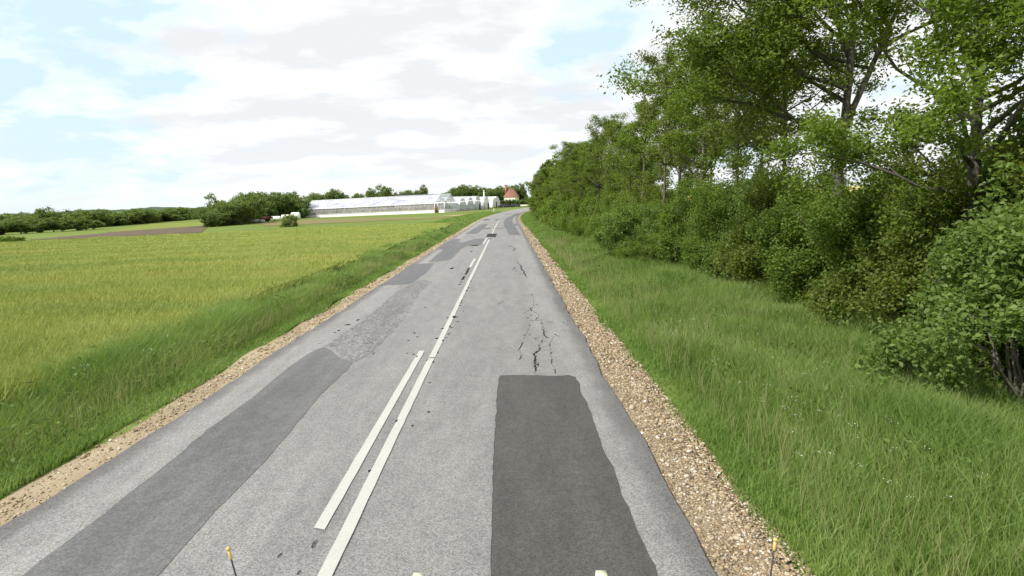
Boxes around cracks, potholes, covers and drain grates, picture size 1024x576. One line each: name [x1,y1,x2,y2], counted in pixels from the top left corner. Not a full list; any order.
crack [518,295,558,374]
